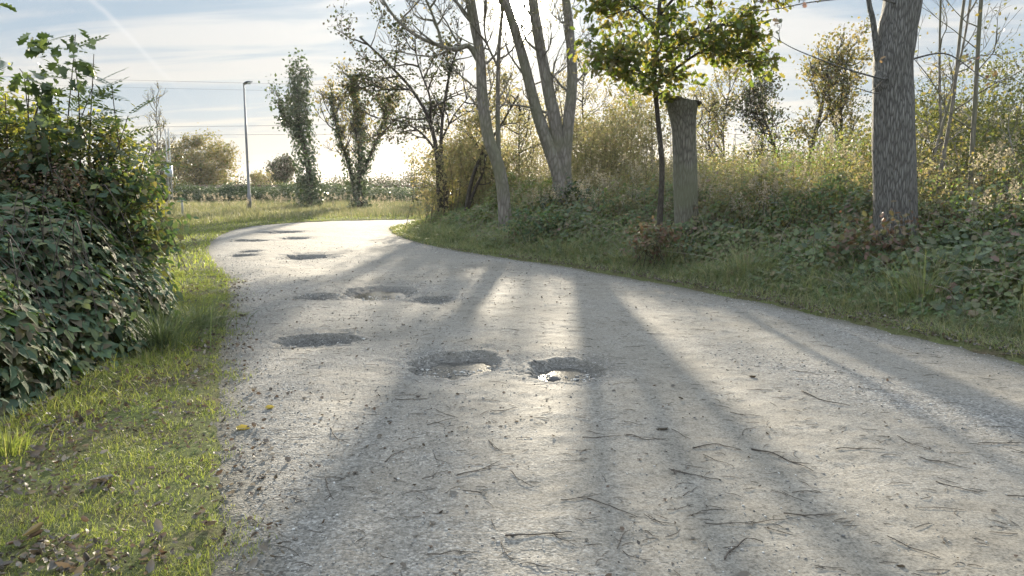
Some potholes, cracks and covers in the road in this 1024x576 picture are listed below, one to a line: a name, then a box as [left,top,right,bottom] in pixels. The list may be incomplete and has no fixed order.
pothole [397,349,512,382]
pothole [408,295,460,305]
pothole [518,356,614,385]
pothole [334,284,425,302]
pothole [263,331,374,349]
pothole [287,292,345,301]
